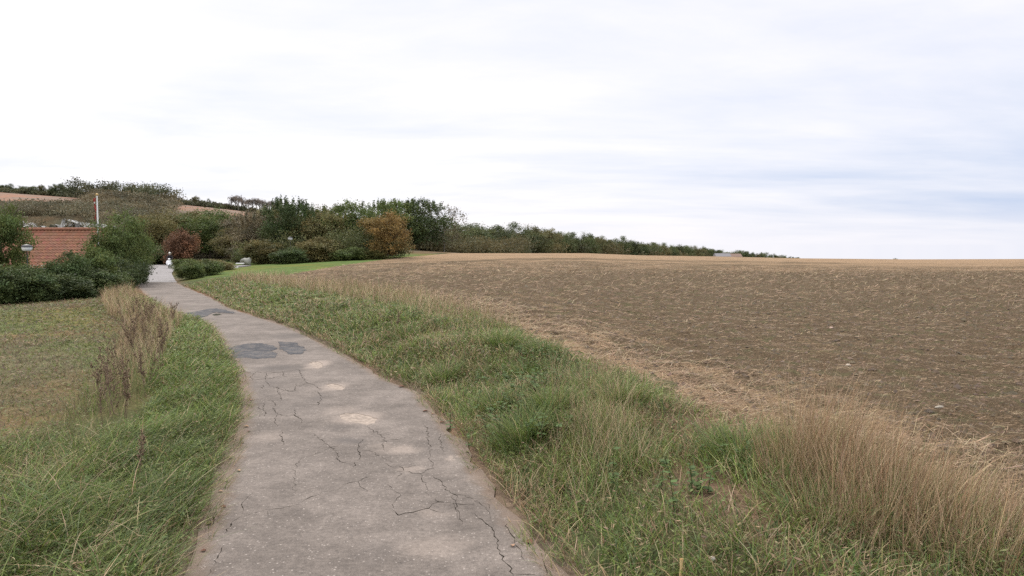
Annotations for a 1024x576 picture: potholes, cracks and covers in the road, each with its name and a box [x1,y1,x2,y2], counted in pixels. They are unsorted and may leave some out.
crack [207,370,547,576]
